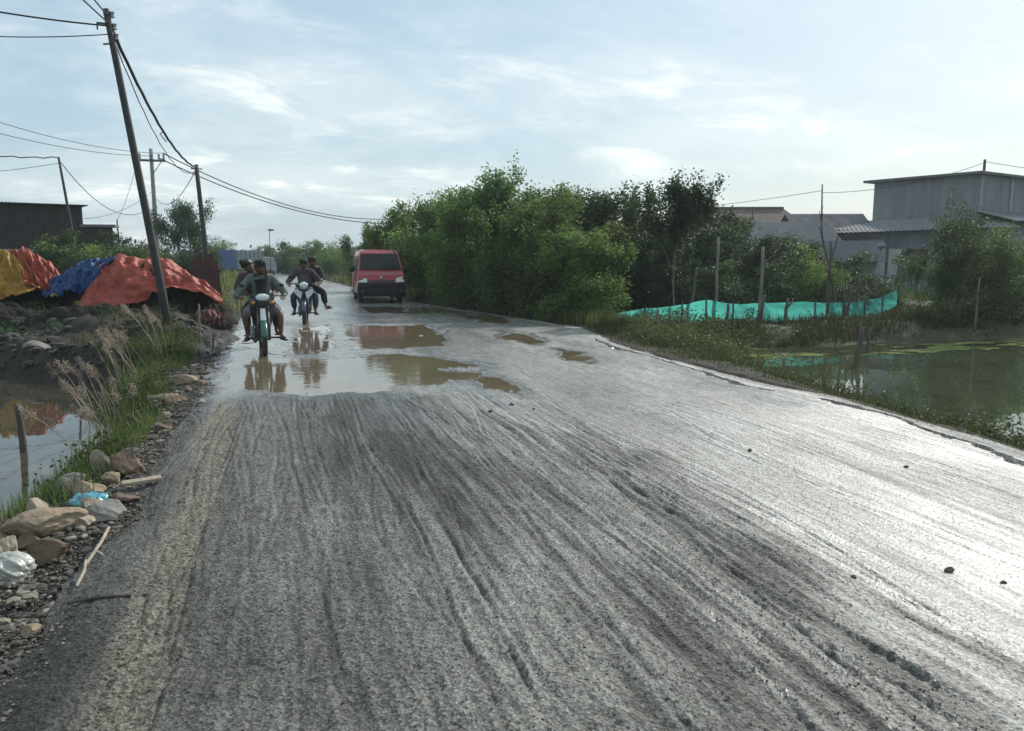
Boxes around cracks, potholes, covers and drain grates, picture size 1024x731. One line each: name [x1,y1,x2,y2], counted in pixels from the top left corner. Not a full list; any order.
pothole [498,329,546,346]
pothole [342,323,449,350]
pothole [199,349,490,403]
pothole [556,348,596,364]
pothole [469,375,529,398]
